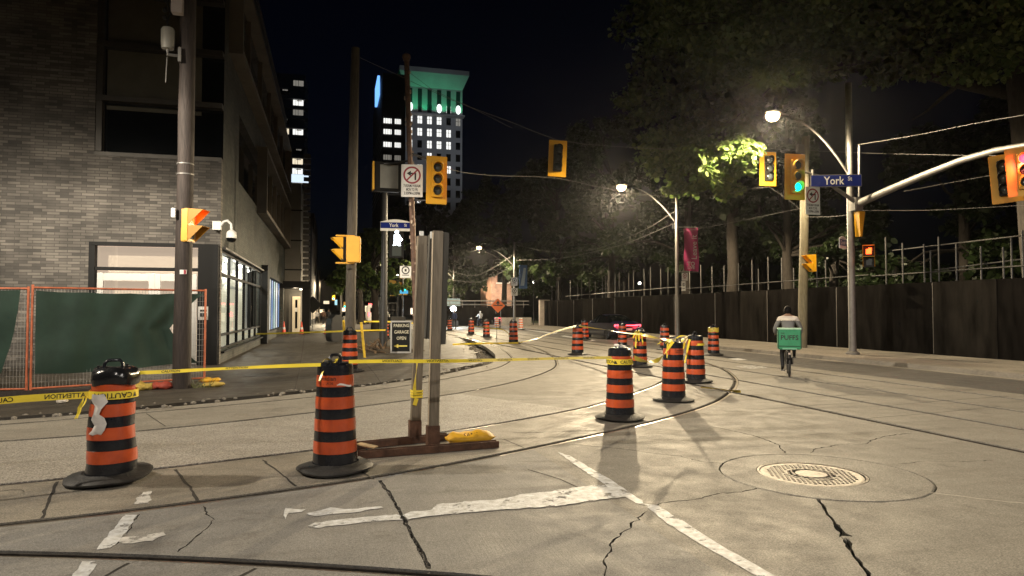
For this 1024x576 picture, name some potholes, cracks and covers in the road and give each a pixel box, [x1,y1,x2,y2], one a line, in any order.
crack [177,506,215,552]
manhole cover [720,454,936,503]
crack [603,488,757,575]
